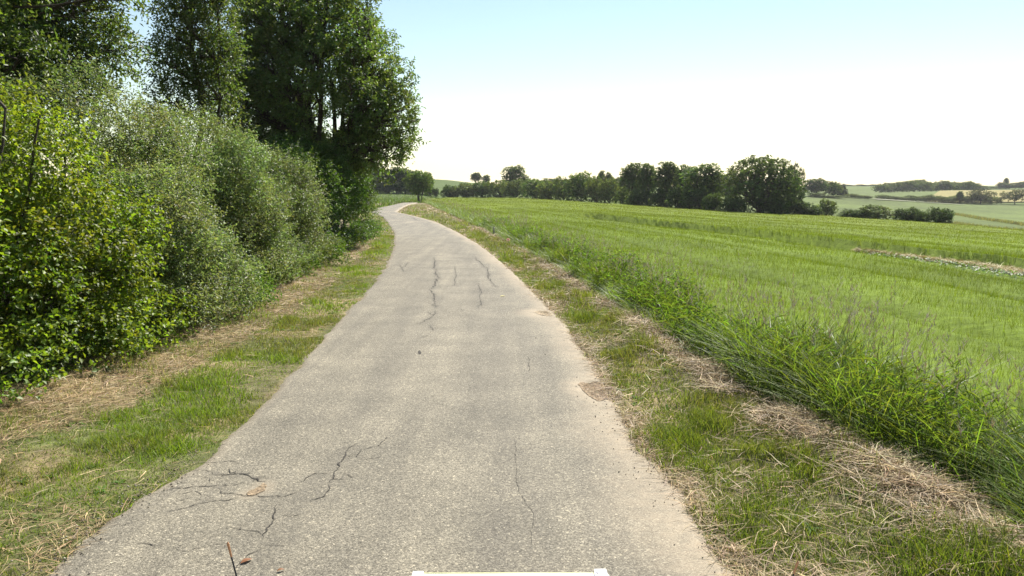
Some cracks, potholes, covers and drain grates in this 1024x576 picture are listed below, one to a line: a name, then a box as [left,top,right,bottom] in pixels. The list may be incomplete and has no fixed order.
crack [420,261,455,337]
crack [132,437,387,568]
pothole [578,381,624,401]
